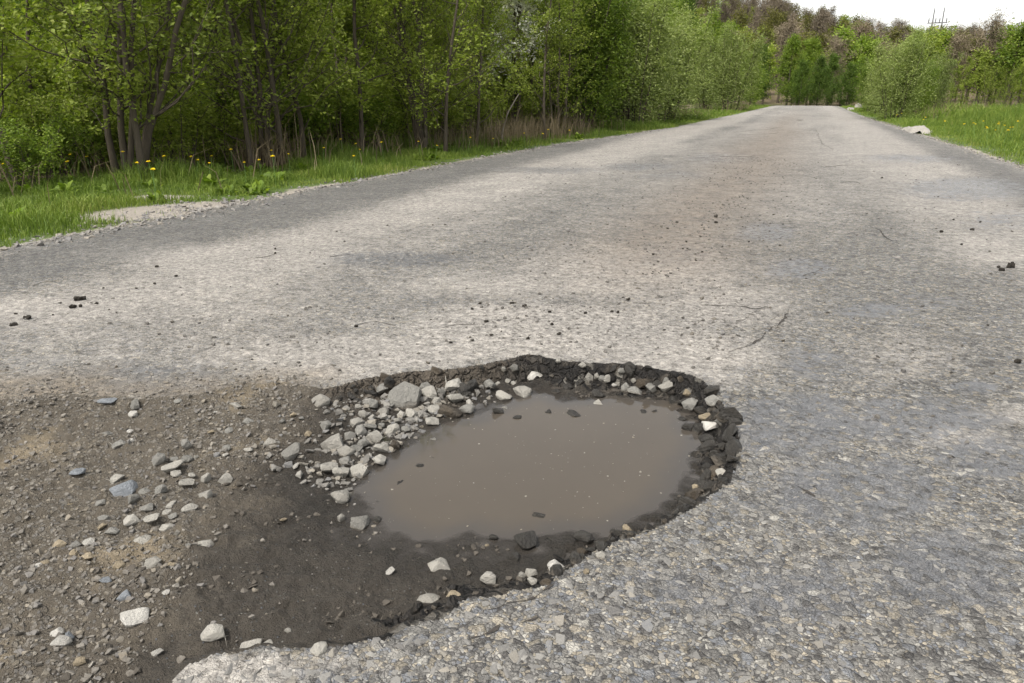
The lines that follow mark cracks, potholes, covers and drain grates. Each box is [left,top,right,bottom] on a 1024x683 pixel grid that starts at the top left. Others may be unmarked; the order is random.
pothole [95,354,742,683]
crack [713,305,788,352]
